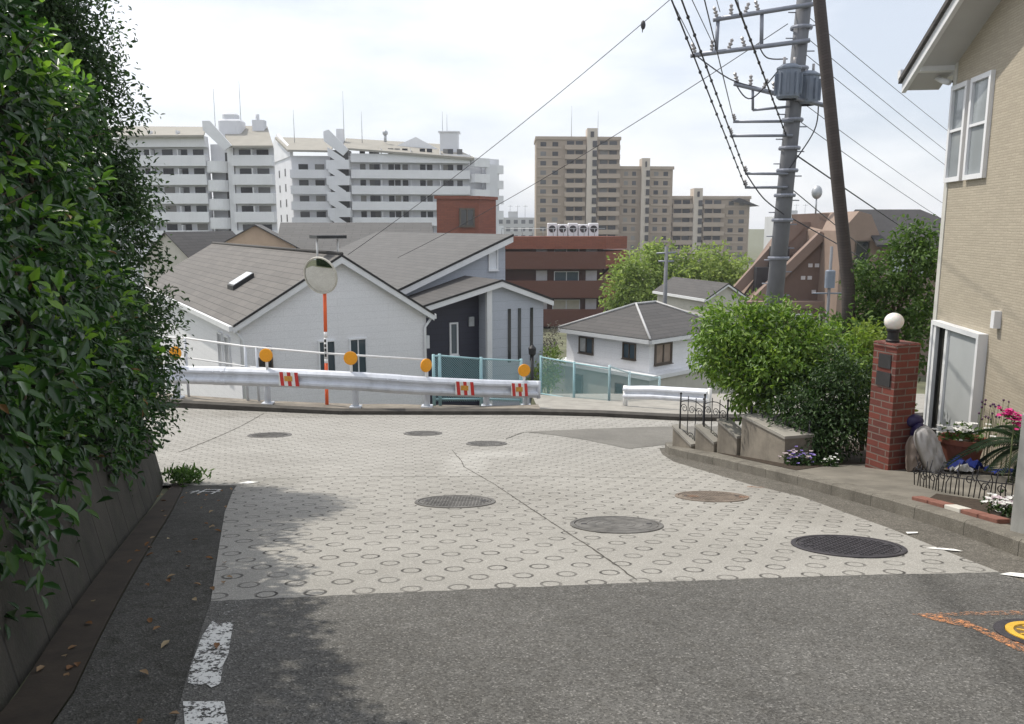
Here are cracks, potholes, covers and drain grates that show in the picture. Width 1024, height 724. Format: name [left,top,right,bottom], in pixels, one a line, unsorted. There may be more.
manhole cover [414,495,496,508]
manhole cover [791,534,908,558]
manhole cover [675,491,749,502]
crack [452,450,637,580]
manhole cover [570,516,664,534]
